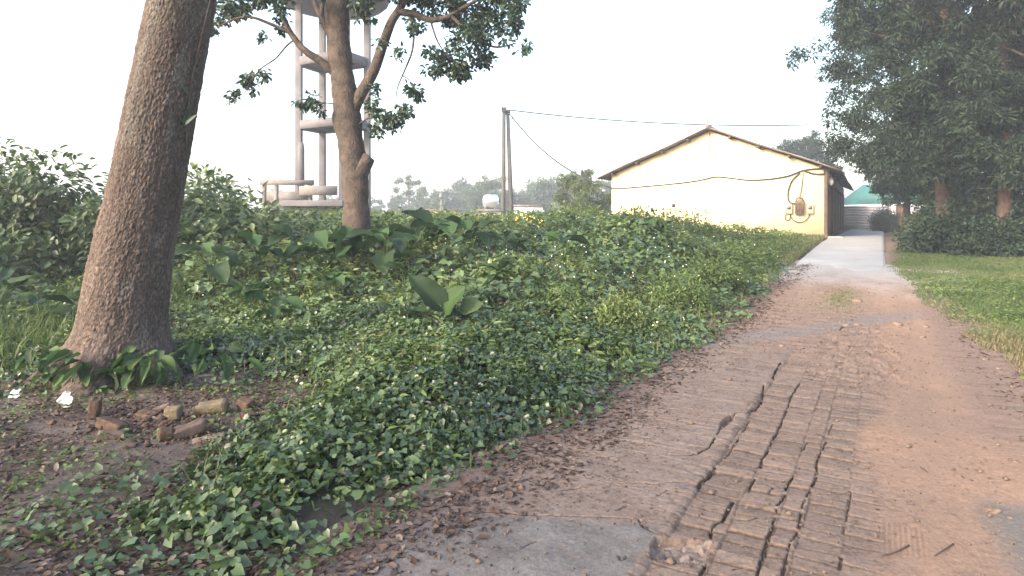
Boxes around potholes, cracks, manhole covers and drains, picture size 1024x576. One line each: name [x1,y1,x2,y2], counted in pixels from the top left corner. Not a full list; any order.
crack [709,385,834,576]
crack [839,492,851,570]
pothole [652,539,713,567]
